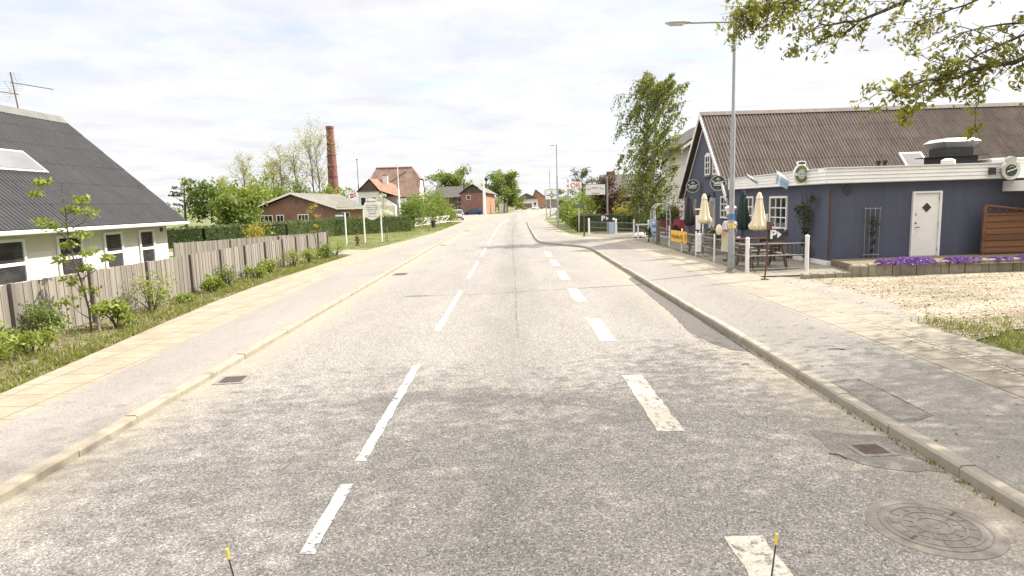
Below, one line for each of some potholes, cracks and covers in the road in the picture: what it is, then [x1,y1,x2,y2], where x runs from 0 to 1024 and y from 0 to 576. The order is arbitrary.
drain grate [842,441,900,457]
manhole cover [865,498,1010,560]
drain grate [212,374,253,385]
